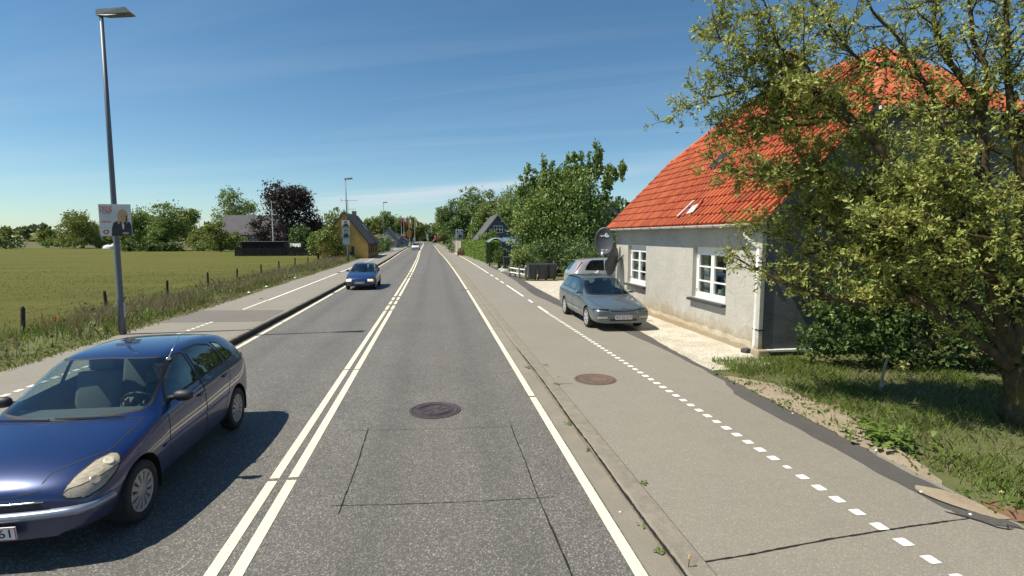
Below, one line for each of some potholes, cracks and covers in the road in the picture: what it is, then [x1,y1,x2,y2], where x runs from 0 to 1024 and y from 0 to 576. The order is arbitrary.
manhole cover [409,402,461,419]
manhole cover [574,374,616,385]
